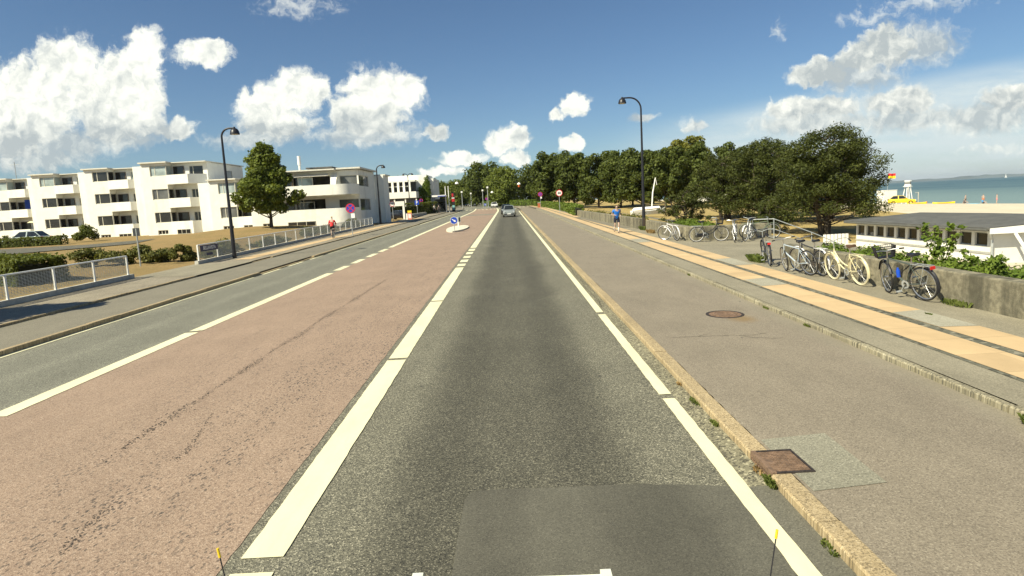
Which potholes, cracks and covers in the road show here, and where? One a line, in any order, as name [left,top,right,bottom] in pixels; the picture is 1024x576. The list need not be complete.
manhole cover [706,310,745,318]
